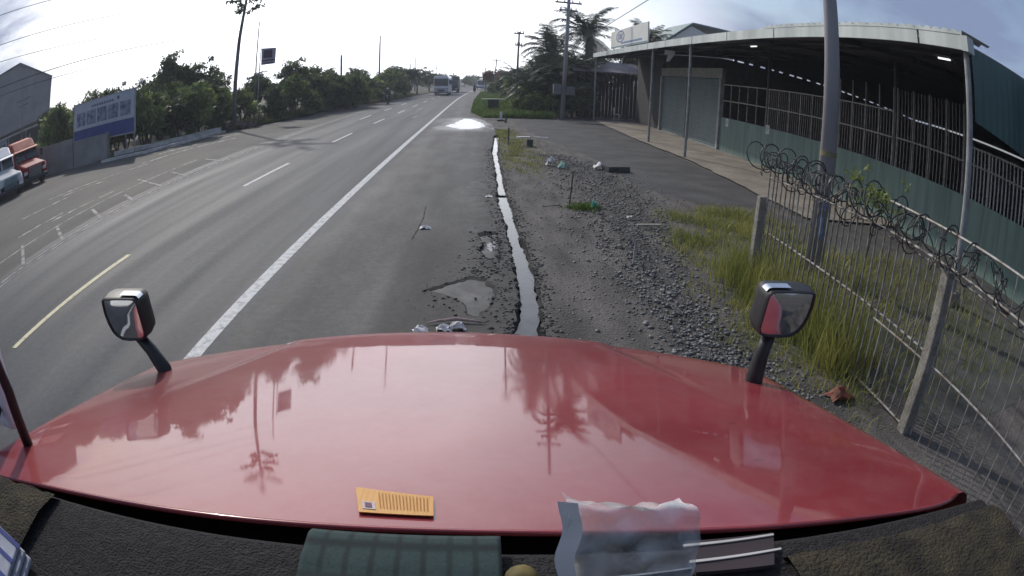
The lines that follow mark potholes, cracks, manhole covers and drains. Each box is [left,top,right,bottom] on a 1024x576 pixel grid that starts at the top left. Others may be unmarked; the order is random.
pothole [477,231,501,258]
pothole [424,276,499,317]
